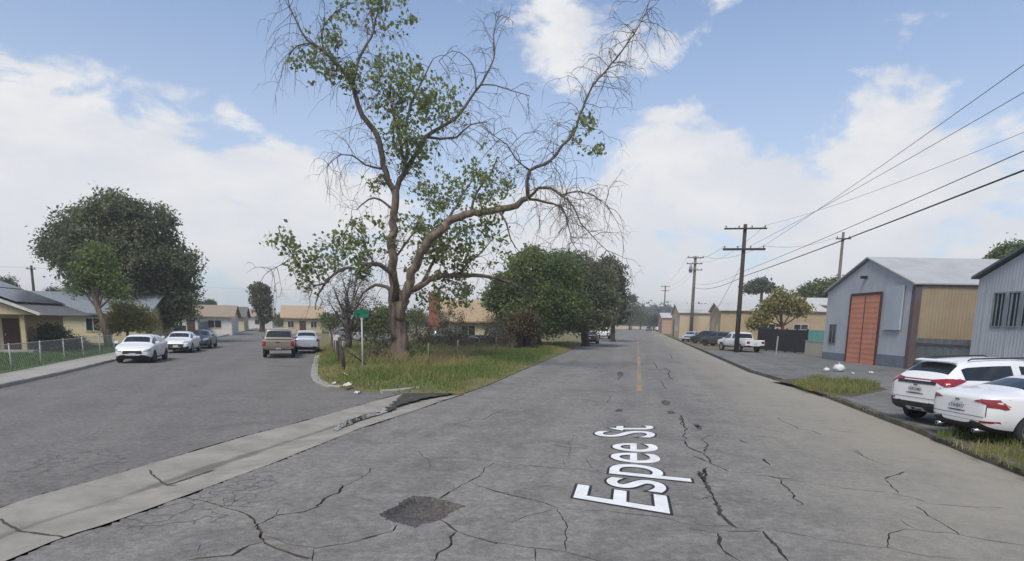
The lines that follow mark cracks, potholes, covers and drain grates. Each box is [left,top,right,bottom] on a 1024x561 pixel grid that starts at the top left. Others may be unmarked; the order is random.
crack [431,415,1020,561]
pothole [379,496,466,528]
crack [574,353,672,405]
crack [125,468,397,561]
